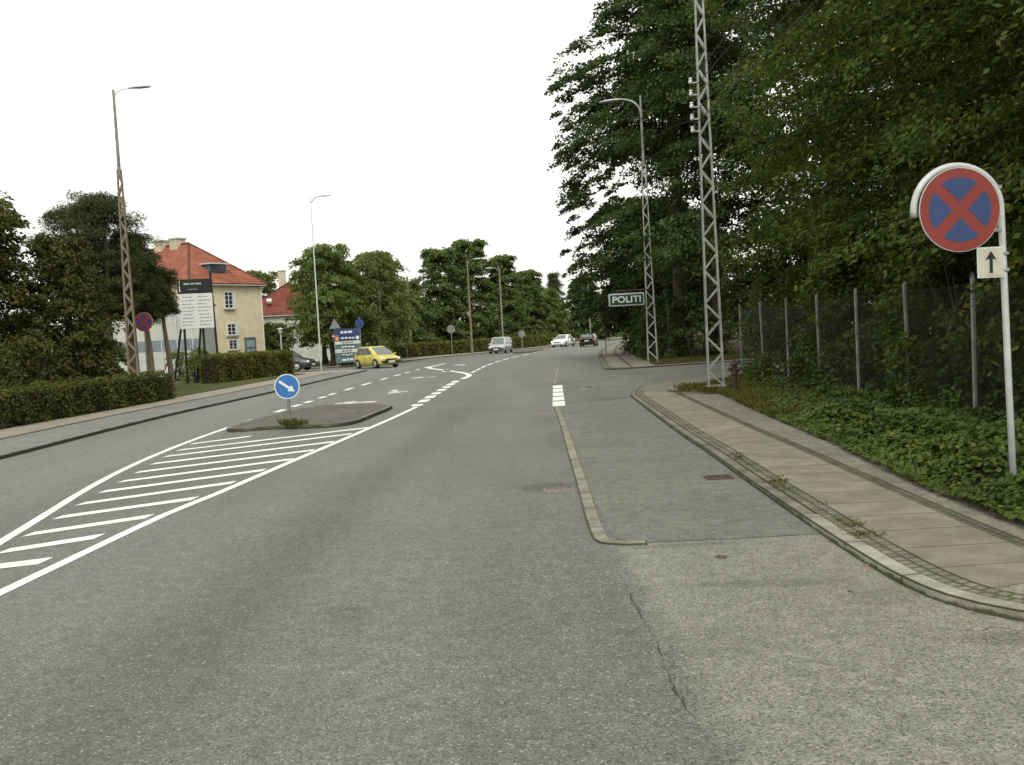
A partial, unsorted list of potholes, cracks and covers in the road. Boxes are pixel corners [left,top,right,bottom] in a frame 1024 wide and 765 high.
crack [605,557,703,738]
